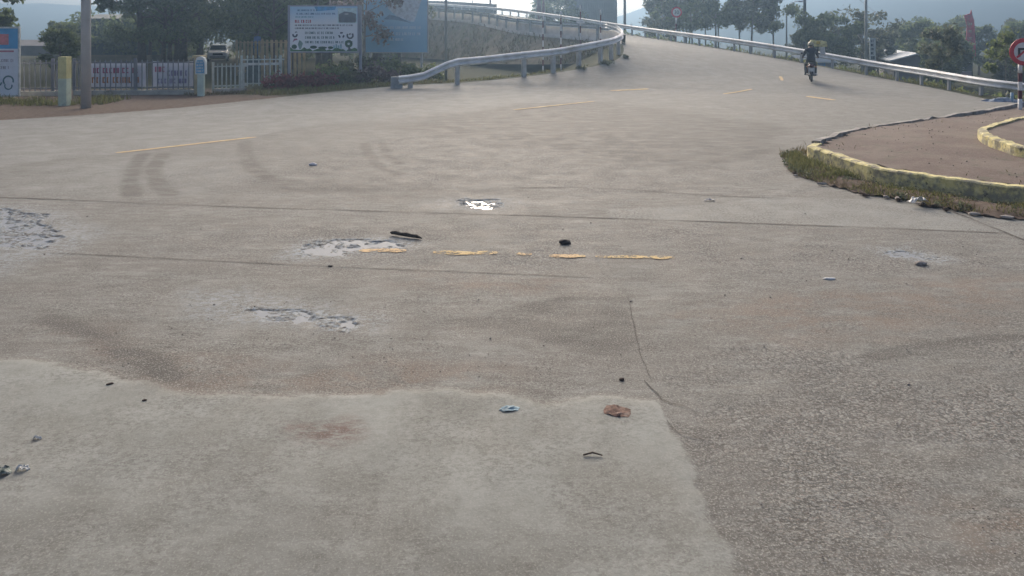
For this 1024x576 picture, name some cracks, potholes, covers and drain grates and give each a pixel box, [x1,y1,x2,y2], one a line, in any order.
pothole [0,208,68,250]
pothole [293,238,407,257]
pothole [883,249,949,263]
pothole [240,305,362,333]
pothole [455,197,504,211]
crack [644,380,708,438]
